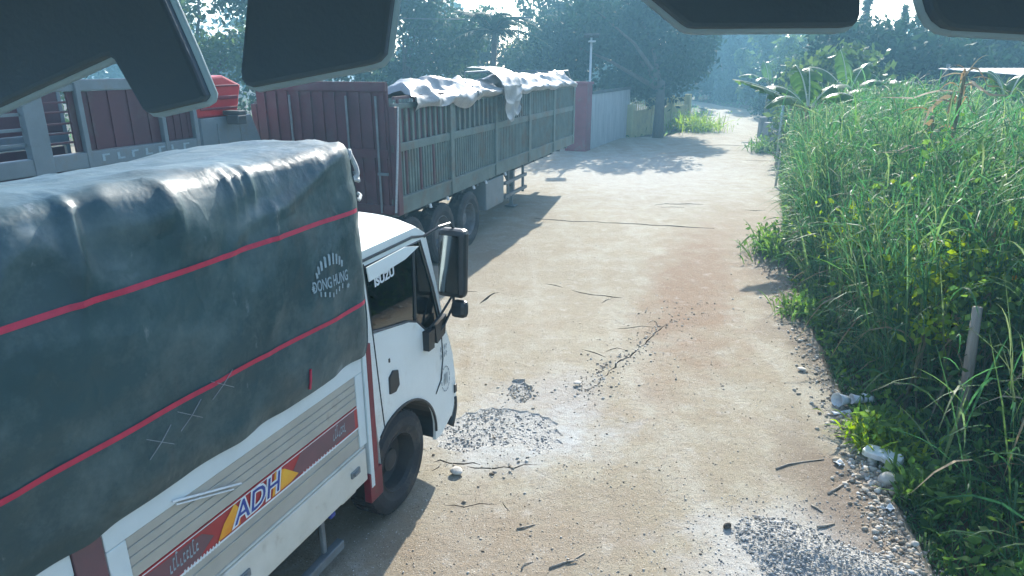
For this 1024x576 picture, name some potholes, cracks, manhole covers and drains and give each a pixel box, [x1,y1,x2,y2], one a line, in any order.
pothole [507,379,533,403]
crack [536,203,714,229]
crack [432,459,533,471]
pothole [437,407,563,454]
crack [582,323,669,392]
